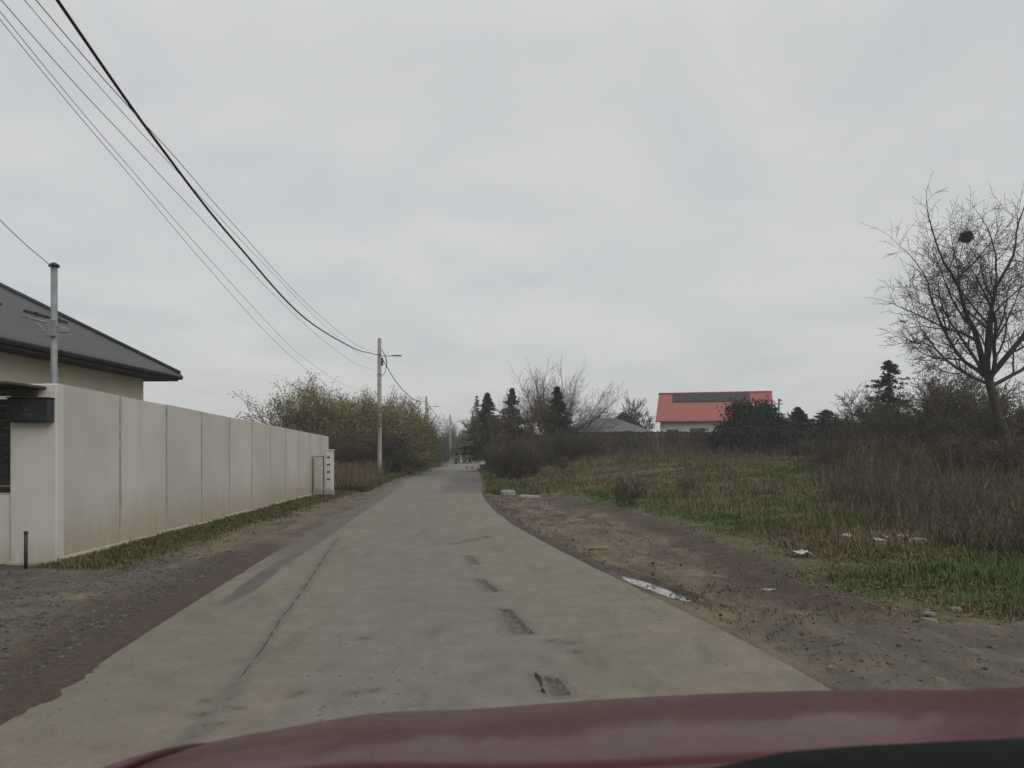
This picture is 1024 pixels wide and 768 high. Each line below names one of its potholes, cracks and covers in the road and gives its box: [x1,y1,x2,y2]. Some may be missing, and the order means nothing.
pothole [477,579,499,592]
crack [185,538,338,738]
pothole [498,608,536,634]
pothole [543,677,571,696]
